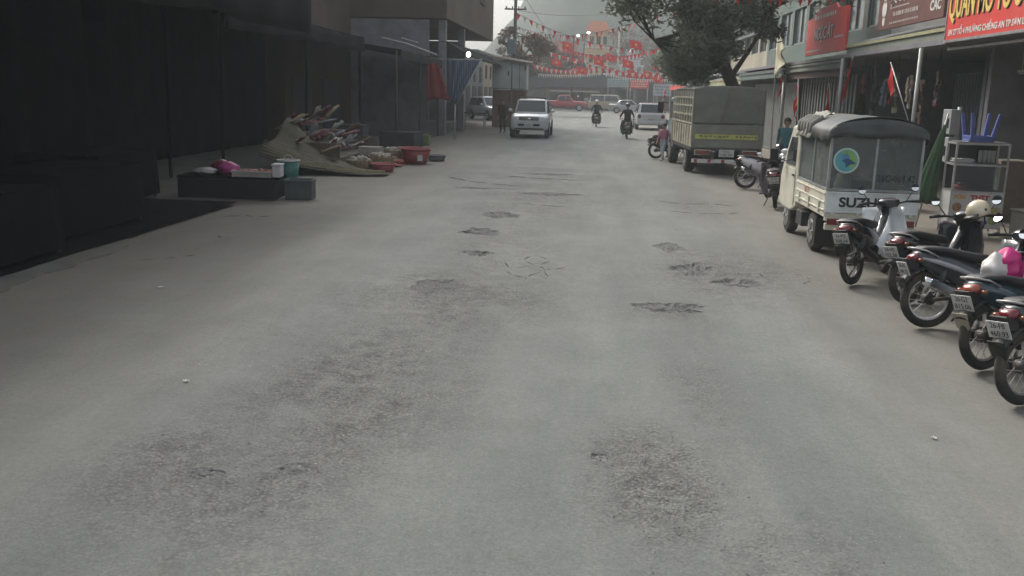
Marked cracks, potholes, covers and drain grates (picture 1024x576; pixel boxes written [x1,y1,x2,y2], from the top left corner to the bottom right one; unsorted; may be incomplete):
pothole [184,467,227,481]
pothole [630,302,705,314]
pothole [709,278,767,288]
pothole [652,242,689,253]
pothole [667,262,718,277]
pothole [409,279,469,298]
pothole [458,227,501,236]
